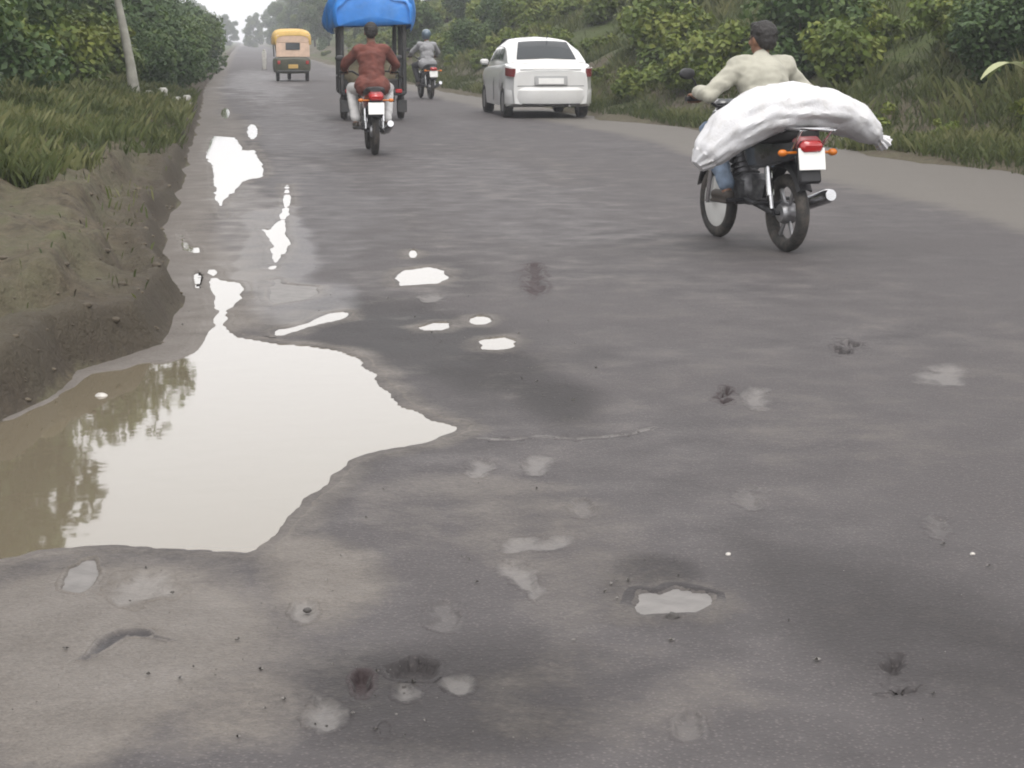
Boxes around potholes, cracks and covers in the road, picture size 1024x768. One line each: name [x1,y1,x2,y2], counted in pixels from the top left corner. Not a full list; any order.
crack [474,426,661,442]
pothole [375,654,446,684]
pothole [708,385,739,406]
pothole [54,555,106,596]
pothole [874,651,914,698]
pothole [825,337,870,357]
pothole [345,667,380,700]
pothole [197,135,274,220]
pothole [511,260,558,300]
pothole [0,264,482,572]
pothole [470,334,524,351]
pothole [620,582,726,622]
